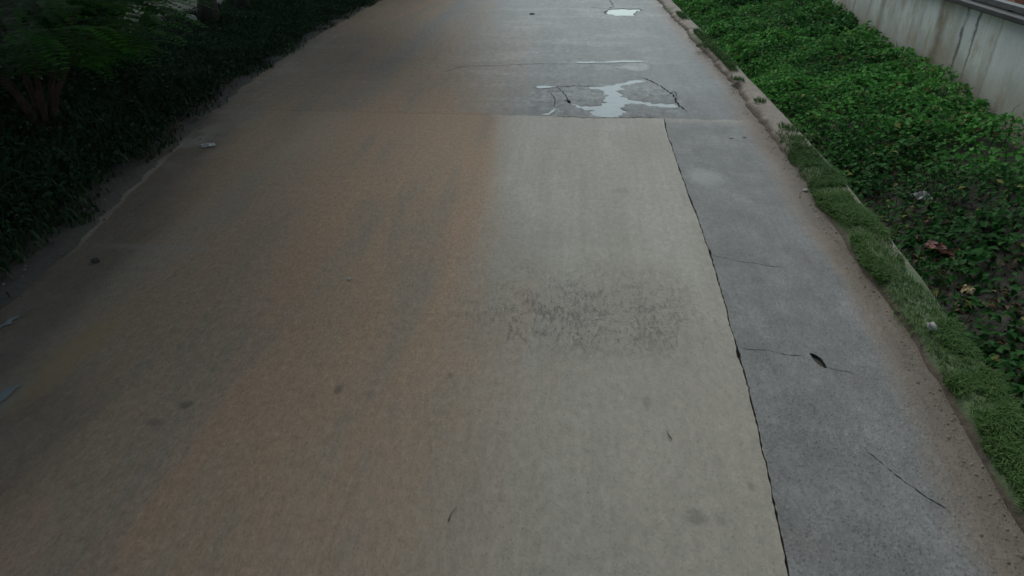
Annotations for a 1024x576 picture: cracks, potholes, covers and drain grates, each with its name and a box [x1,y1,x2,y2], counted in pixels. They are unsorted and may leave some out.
crack [866,449,951,514]
crack [549,76,859,576]
